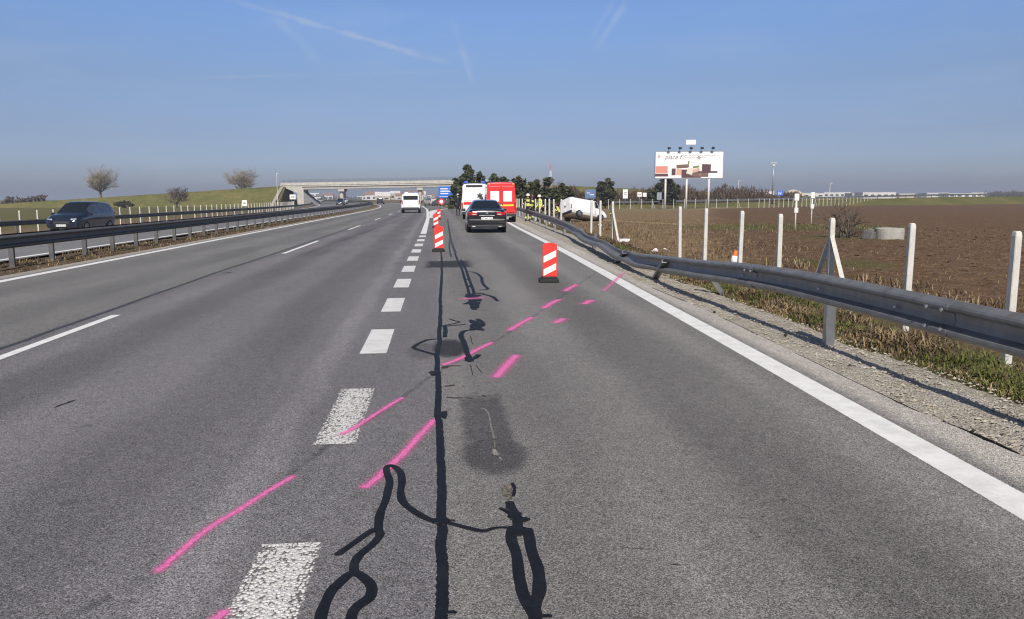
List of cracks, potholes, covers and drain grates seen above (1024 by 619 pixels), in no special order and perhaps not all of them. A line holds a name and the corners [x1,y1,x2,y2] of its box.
pothole [501,484,513,501]
